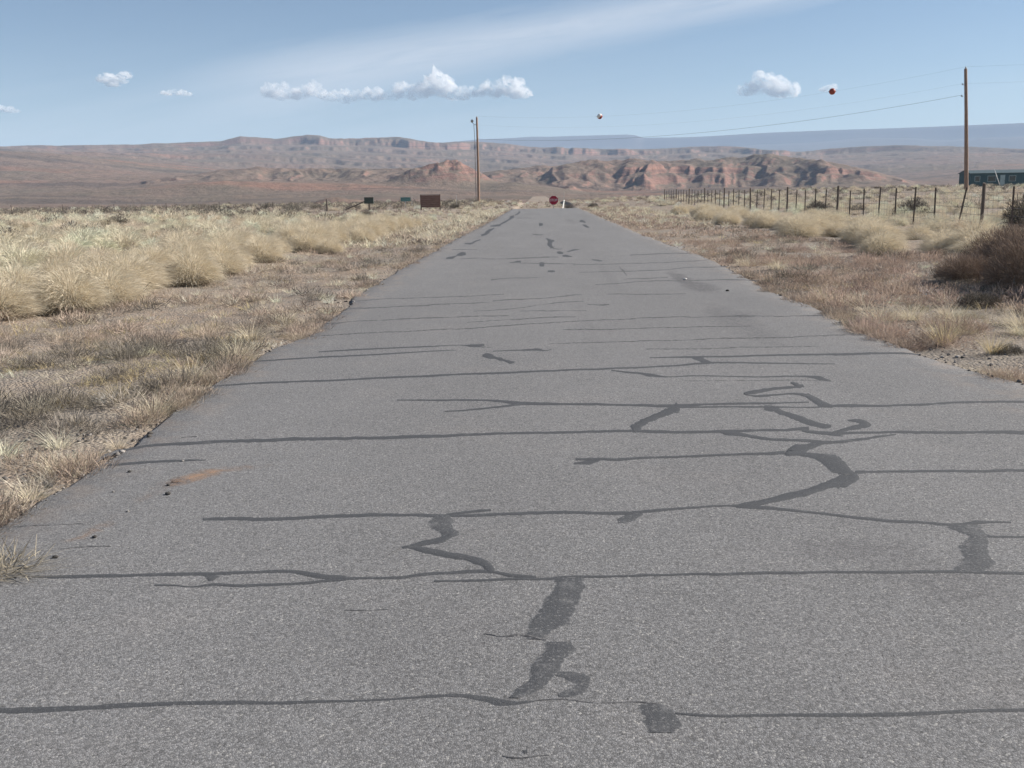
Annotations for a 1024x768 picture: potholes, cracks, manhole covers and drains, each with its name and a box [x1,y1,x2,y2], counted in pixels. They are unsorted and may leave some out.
crack [526,698,669,707]
crack [313,218,861,349]
